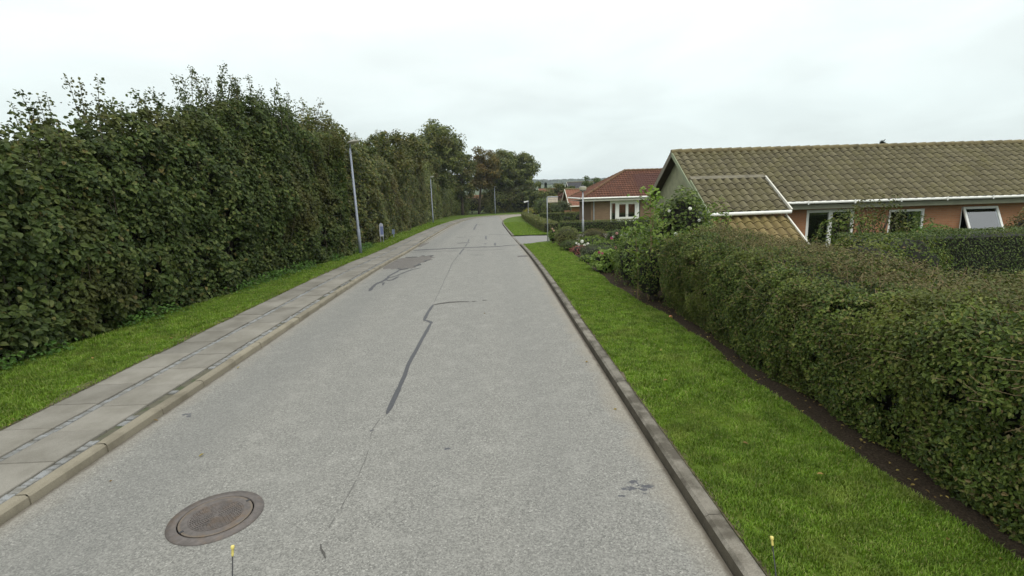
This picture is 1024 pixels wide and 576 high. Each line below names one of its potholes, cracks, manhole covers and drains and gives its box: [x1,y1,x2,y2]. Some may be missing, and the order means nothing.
manhole cover [165,491,264,546]
crack [329,419,380,526]
